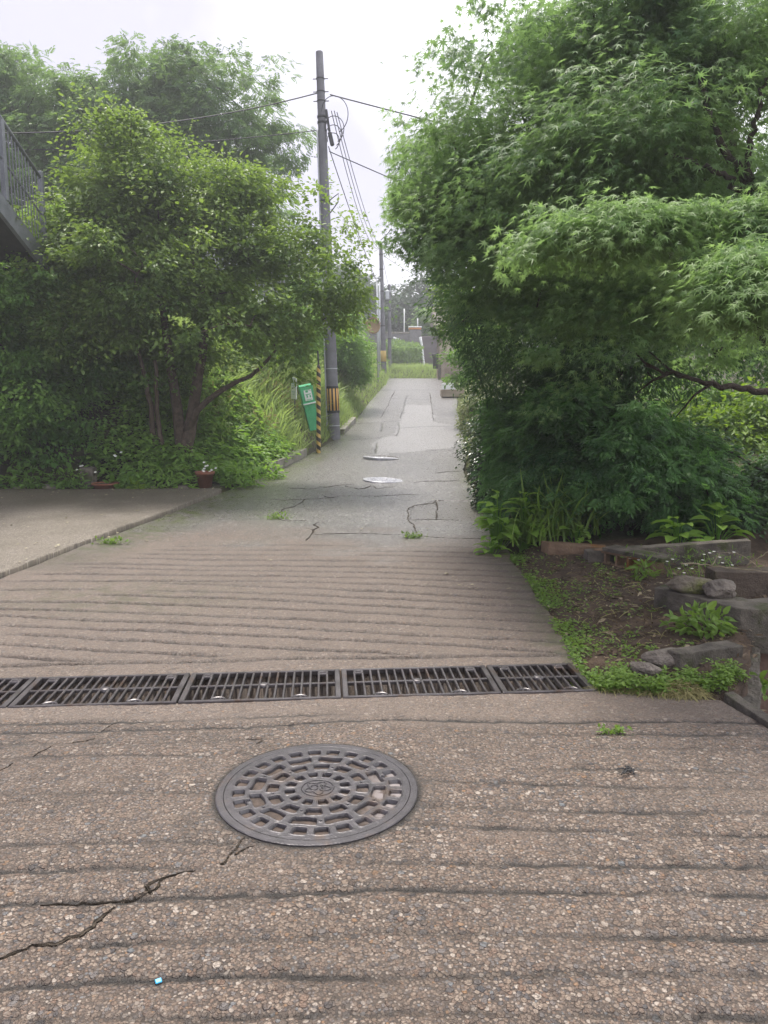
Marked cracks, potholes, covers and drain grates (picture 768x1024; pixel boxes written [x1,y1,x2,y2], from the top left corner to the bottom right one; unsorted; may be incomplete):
crack [267,471,481,541]
drain grate [341,665,501,699]
drain grate [486,663,596,694]
manhole cover [215,744,418,847]
drain grate [178,669,341,704]
drain grate [0,677,36,708]
crack [0,838,255,960]
crack [0,722,117,771]
drain grate [7,673,190,708]
